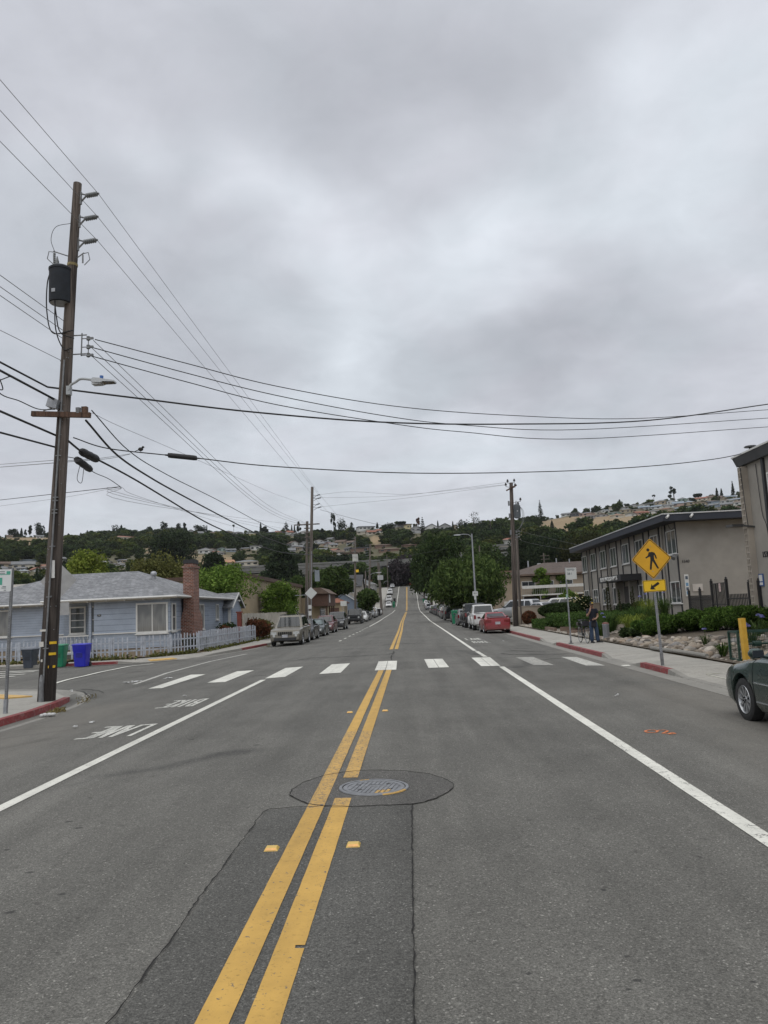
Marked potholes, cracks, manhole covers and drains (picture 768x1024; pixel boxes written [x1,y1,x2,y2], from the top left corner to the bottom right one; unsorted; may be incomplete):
manhole cover [339,779,409,796]
